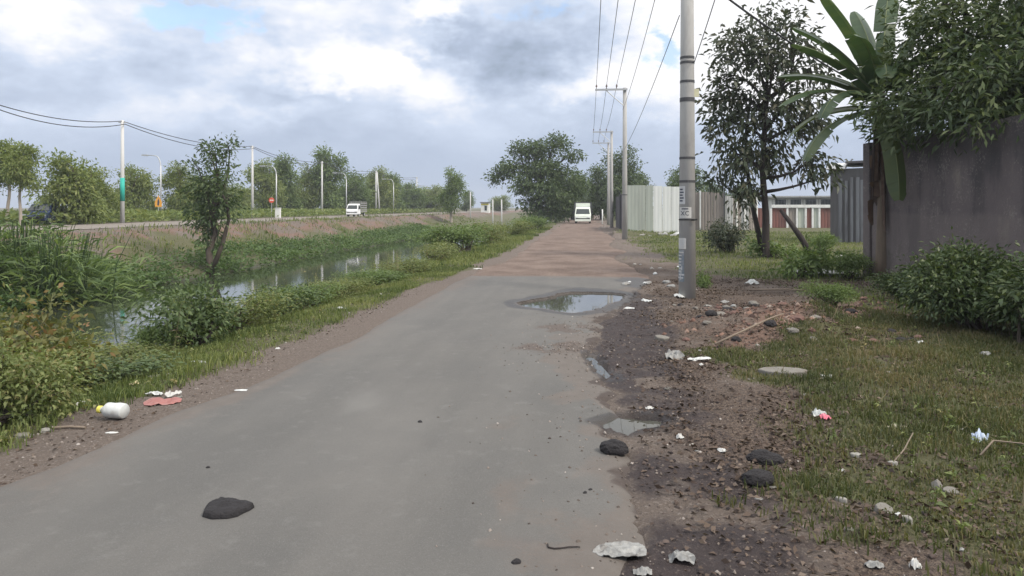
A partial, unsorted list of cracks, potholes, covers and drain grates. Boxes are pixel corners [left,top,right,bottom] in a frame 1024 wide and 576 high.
pothole [514,291,631,314]
